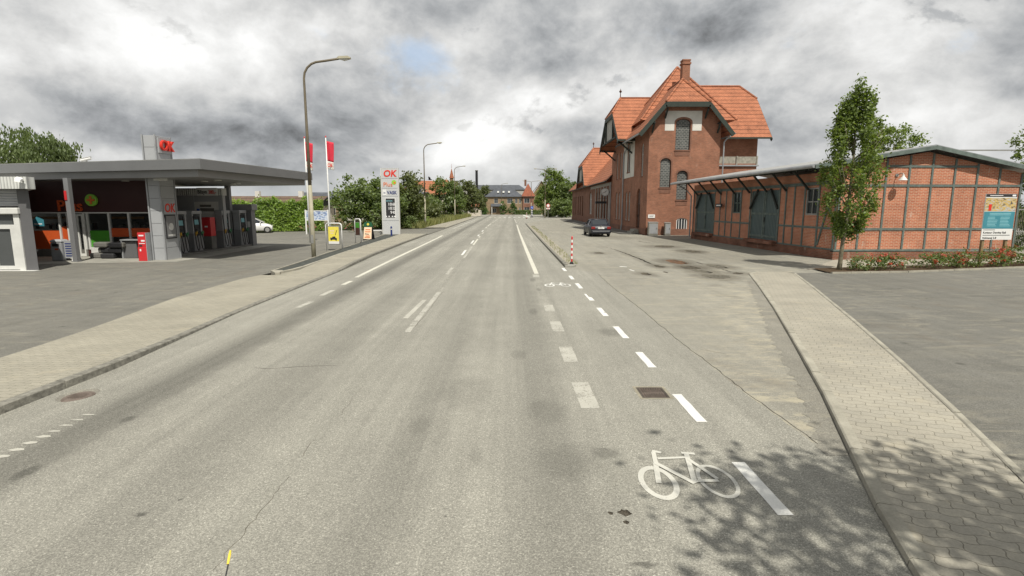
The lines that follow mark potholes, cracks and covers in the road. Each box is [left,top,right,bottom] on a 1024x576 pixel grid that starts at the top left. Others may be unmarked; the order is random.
crack [213,389,360,570]
manhole cover [55,389,100,402]
drain grate [632,386,674,399]
